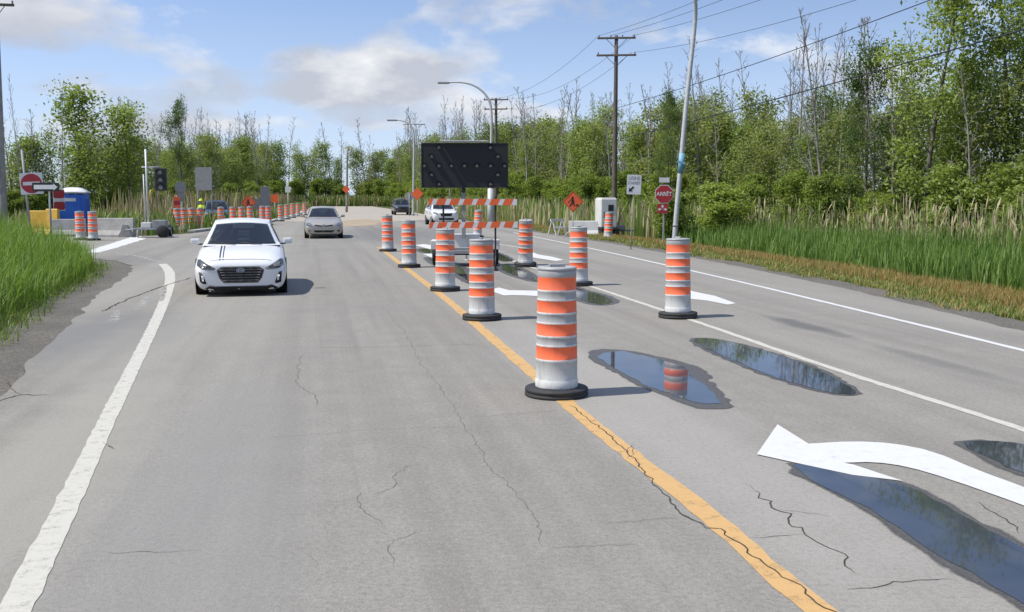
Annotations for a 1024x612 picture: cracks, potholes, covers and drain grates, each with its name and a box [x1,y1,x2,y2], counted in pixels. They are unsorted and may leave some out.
crack [279,308,634,548]
crack [573,406,937,612]
